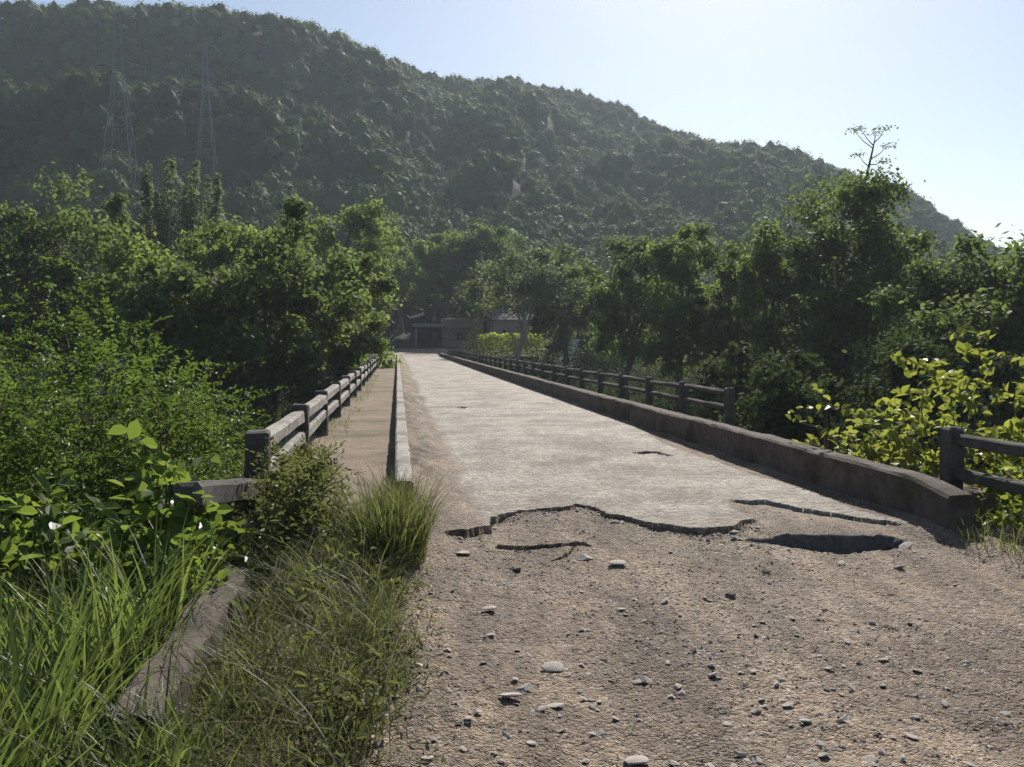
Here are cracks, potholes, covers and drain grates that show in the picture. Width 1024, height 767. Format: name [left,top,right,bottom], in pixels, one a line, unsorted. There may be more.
pothole [741,533,908,555]
crack [449,499,905,562]
